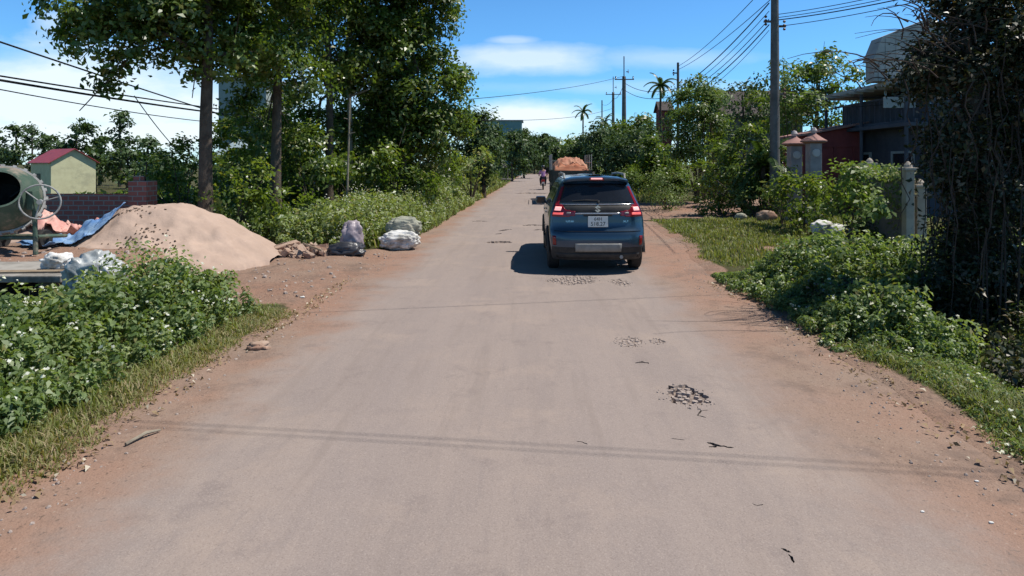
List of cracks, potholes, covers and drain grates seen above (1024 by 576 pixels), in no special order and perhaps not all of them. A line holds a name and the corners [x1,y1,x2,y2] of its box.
pothole [613,336,647,347]
pothole [541,275,600,286]
pothole [657,384,715,410]
